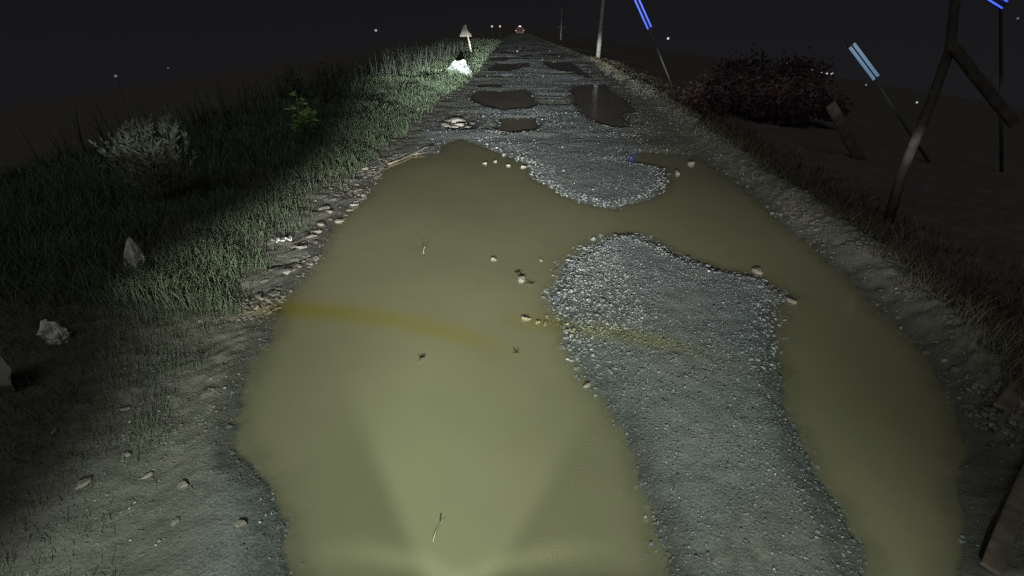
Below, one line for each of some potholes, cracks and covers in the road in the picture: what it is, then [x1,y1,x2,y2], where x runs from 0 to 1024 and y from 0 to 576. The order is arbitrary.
pothole [569,83,640,127]
pothole [540,60,594,78]
pothole [494,116,542,134]
pothole [487,62,530,71]
pothole [468,88,538,110]
pothole [221,137,988,576]
